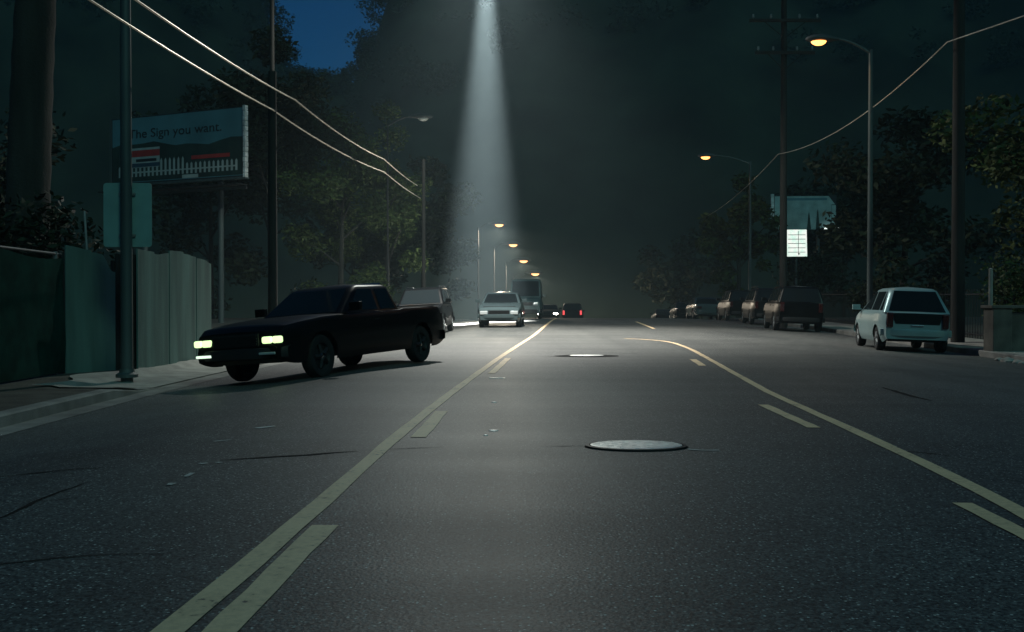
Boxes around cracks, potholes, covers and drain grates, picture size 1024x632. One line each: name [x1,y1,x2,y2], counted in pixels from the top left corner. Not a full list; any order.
manhole cover [584,440,688,452]
crack [226,451,352,460]
crack [0,553,150,564]
crack [882,387,932,401]
crack [0,468,91,518]
